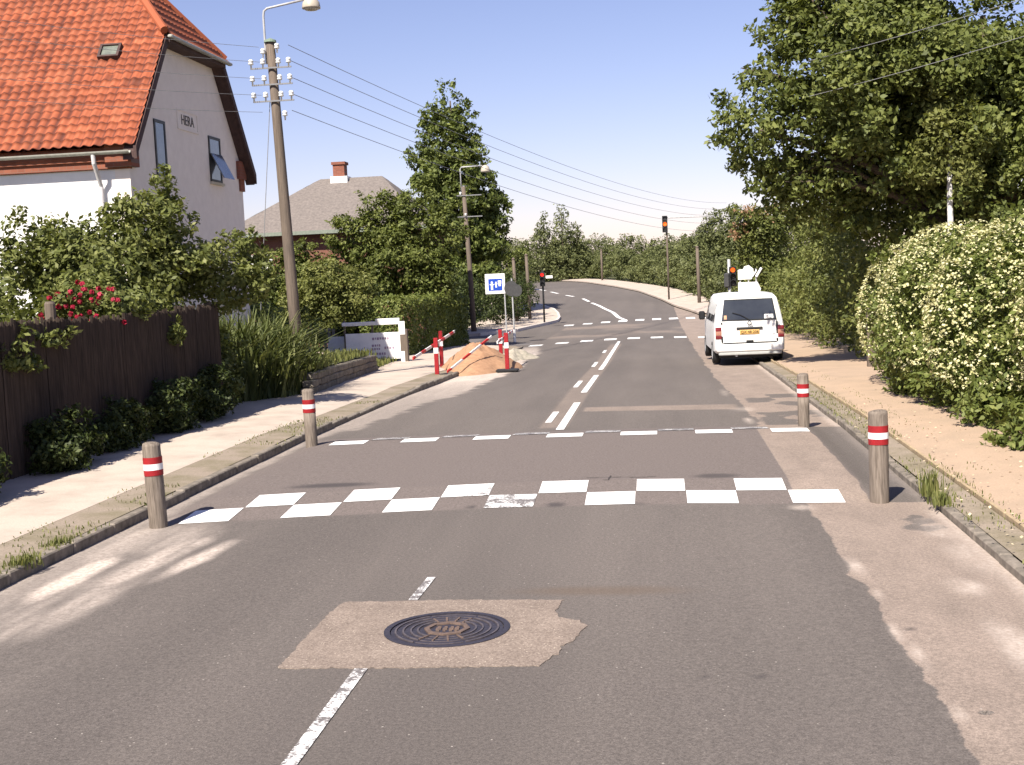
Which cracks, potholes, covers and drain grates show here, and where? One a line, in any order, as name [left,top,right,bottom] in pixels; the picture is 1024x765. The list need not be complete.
manhole cover [384,611,510,648]
